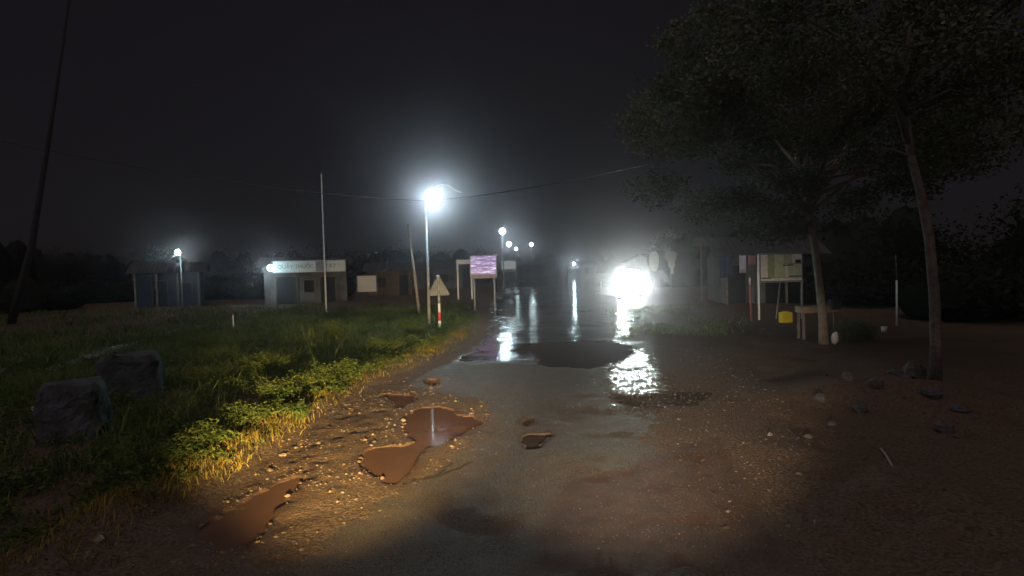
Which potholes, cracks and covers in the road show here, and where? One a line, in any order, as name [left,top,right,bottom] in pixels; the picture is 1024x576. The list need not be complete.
pothole [606,389,720,408]
pothole [189,468,310,556]
pothole [376,393,420,408]
pothole [519,417,535,427]
pothole [510,340,640,369]
pothole [520,430,555,450]
pothole [422,377,442,387]
pothole [358,406,485,485]
